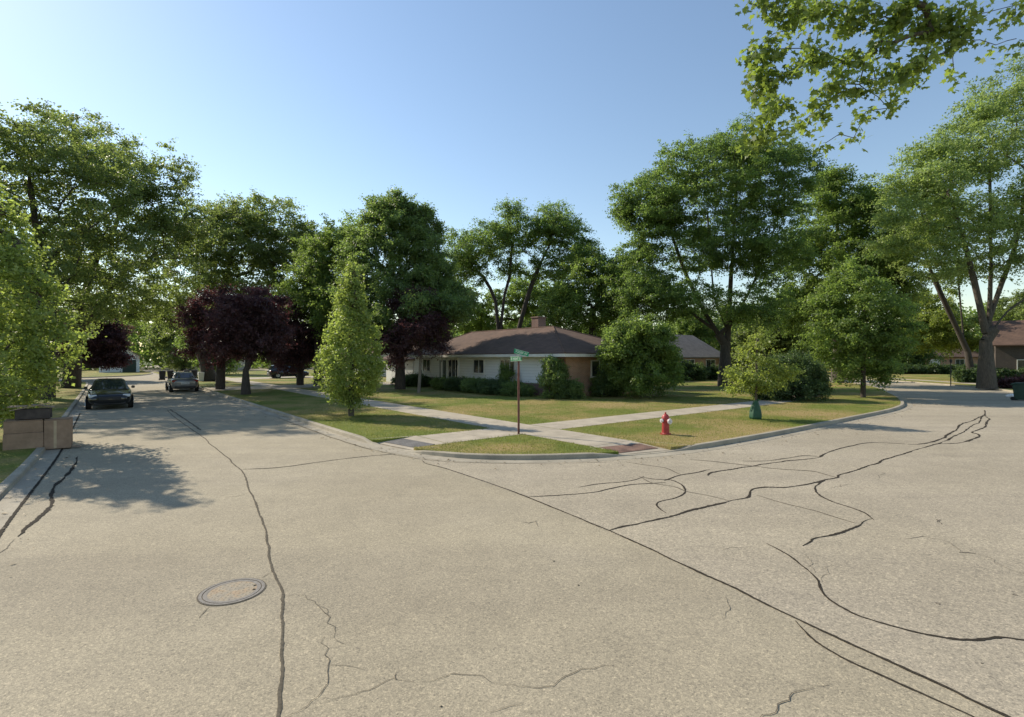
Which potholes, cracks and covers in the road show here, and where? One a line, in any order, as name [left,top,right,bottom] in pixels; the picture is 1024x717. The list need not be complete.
crack [906,519,1014,571]
crack [286,594,359,717]
manhole cover [197,578,266,606]
crack [760,683,830,717]
crack [334,665,615,712]
